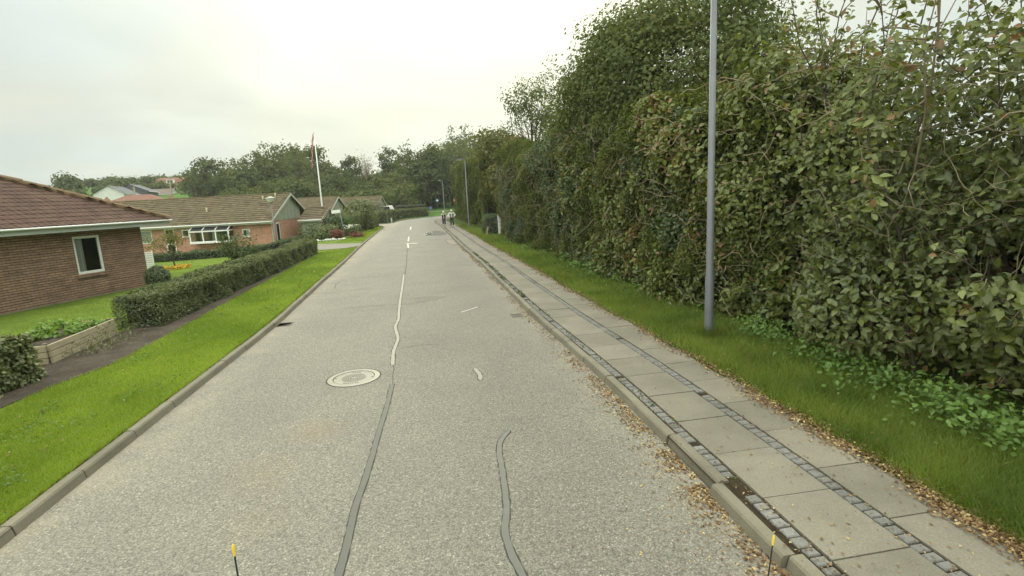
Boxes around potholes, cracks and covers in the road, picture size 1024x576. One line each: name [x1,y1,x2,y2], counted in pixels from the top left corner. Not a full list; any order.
manhole cover [326,369,381,387]
